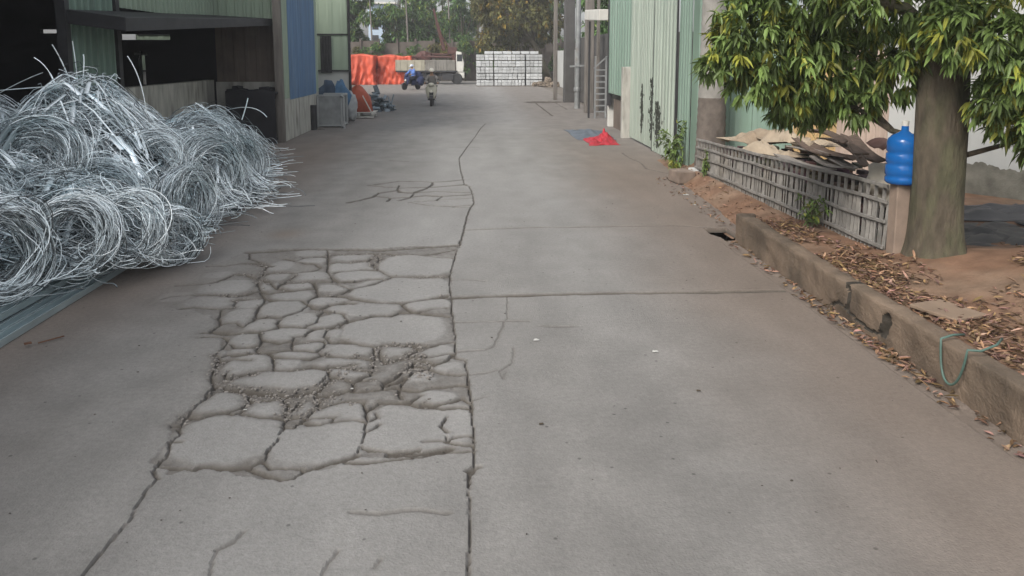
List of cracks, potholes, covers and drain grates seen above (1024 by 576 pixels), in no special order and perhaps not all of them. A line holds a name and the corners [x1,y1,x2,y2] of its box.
crack [80,126,581,576]
